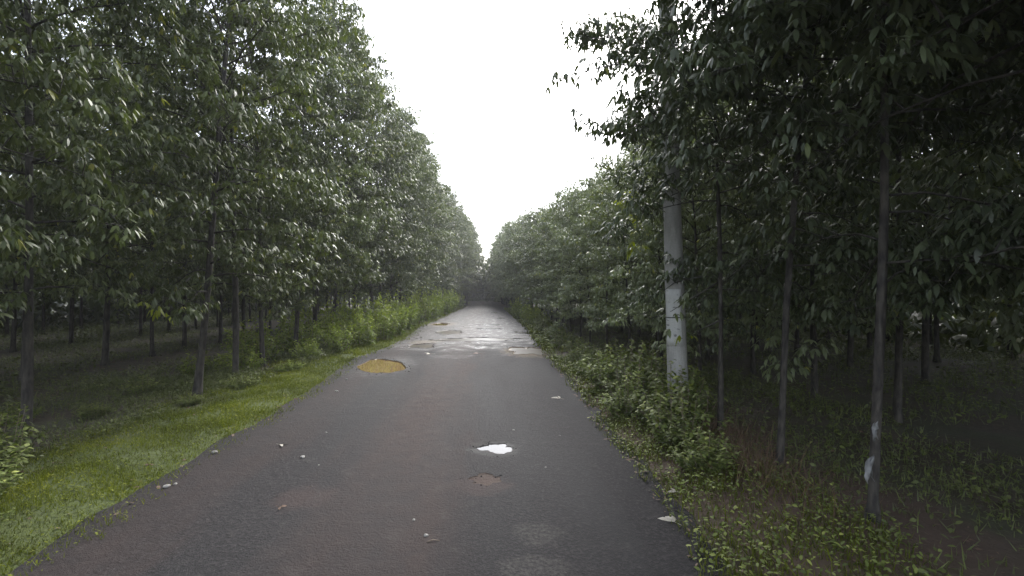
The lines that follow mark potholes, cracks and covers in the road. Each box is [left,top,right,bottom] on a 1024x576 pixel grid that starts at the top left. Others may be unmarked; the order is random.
pothole [508,347,550,355]
pothole [357,359,407,373]
pothole [468,472,502,486]
pothole [474,443,513,455]
